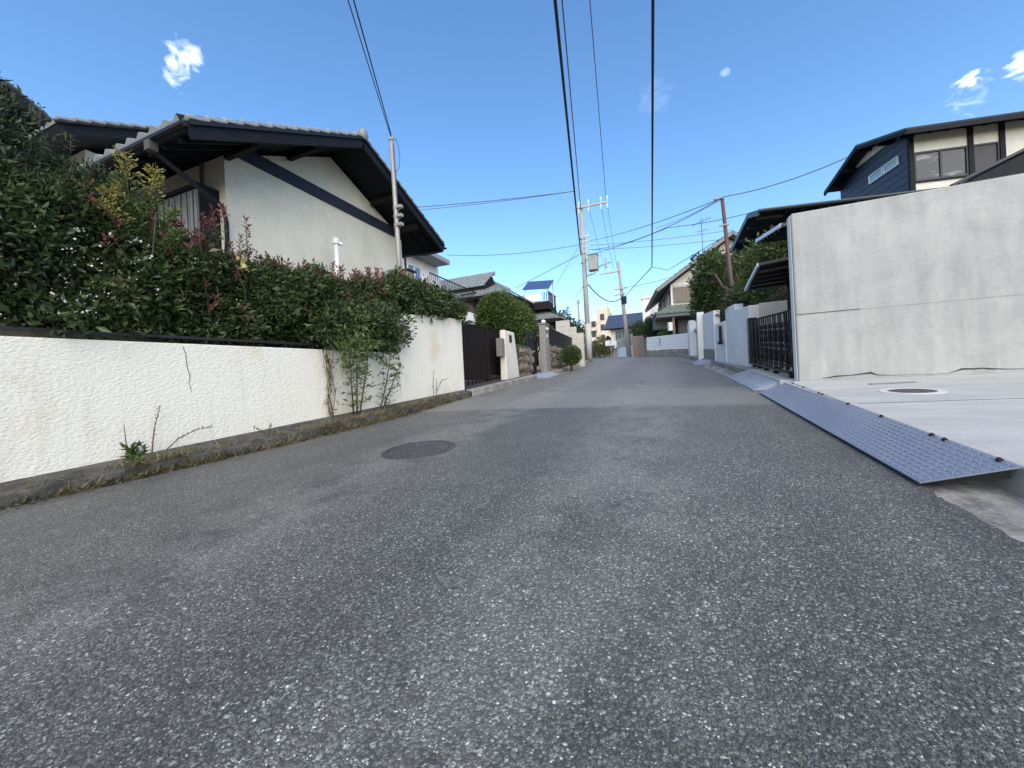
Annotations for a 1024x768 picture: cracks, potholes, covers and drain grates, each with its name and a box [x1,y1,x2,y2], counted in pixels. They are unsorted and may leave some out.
manhole cover [381,440,455,460]
